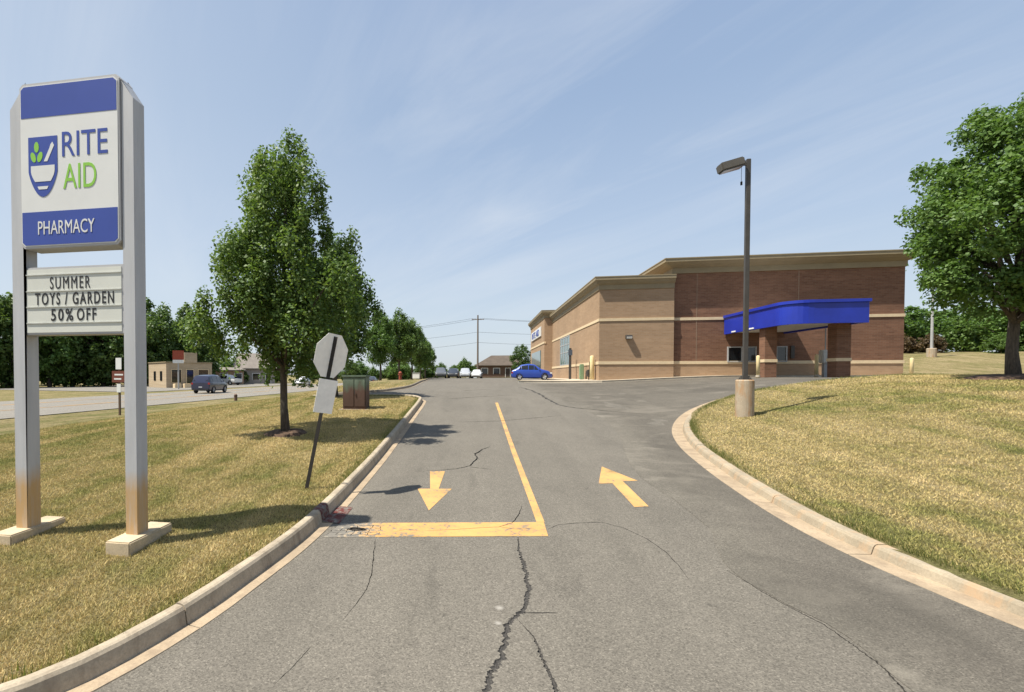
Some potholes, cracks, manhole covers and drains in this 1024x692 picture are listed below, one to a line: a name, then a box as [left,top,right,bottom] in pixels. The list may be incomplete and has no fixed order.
crack [417,447,488,472]
crack [730,572,906,692]
crack [453,387,625,422]
crack [405,506,687,692]
crack [328,525,381,620]
